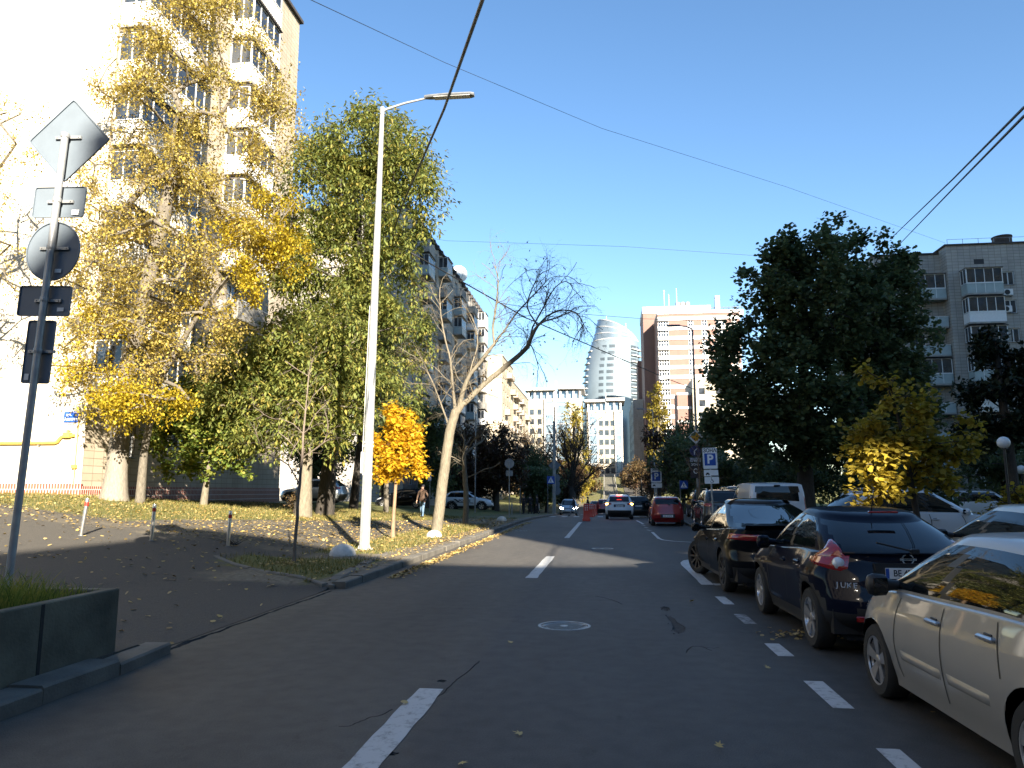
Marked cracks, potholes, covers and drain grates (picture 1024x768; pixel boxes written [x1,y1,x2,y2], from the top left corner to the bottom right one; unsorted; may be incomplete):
crack [339,662,479,727]
manhole cover [538,621,591,631]
